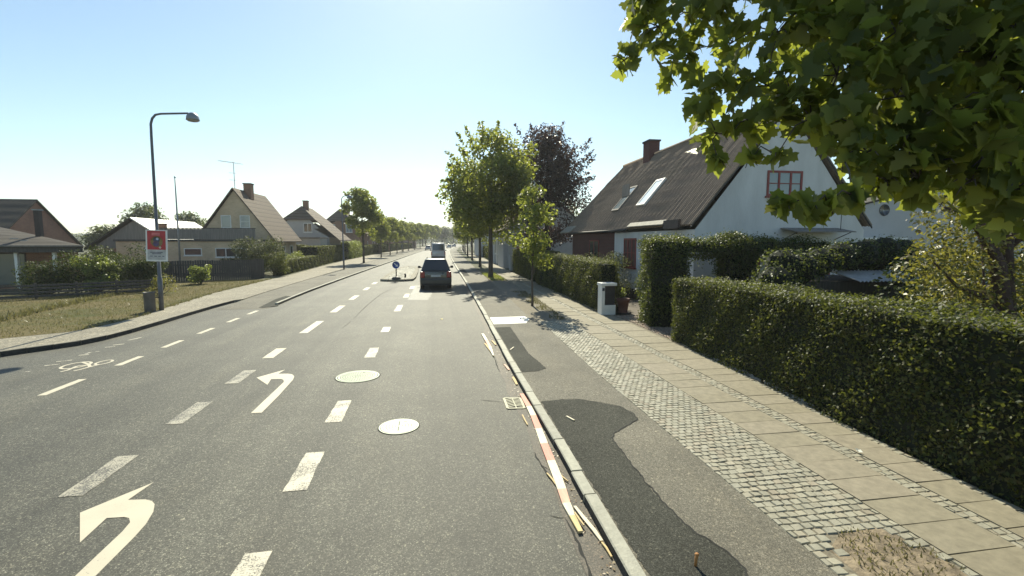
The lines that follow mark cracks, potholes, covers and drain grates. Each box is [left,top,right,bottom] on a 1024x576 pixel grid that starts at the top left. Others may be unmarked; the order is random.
crack [551,515,592,576]
drain grate [503,397,526,409]
manhole cover [335,370,381,383]
manhole cover [378,419,420,435]
